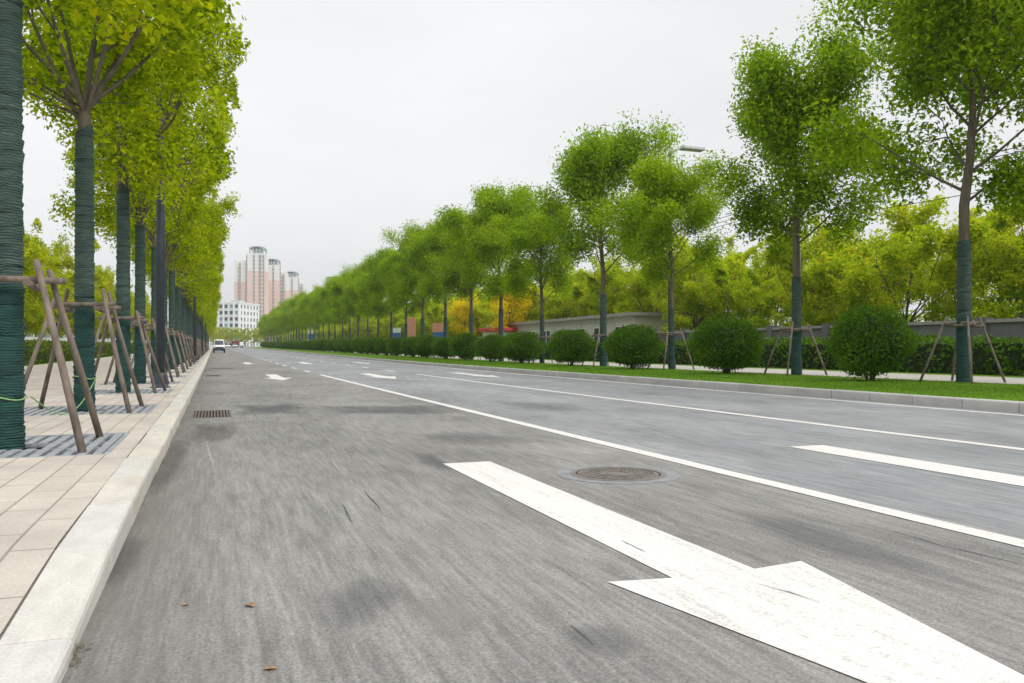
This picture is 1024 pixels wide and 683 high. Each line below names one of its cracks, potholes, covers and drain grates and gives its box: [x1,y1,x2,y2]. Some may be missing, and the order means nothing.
manhole cover [557,465,681,484]
drain grate [191,410,232,418]
